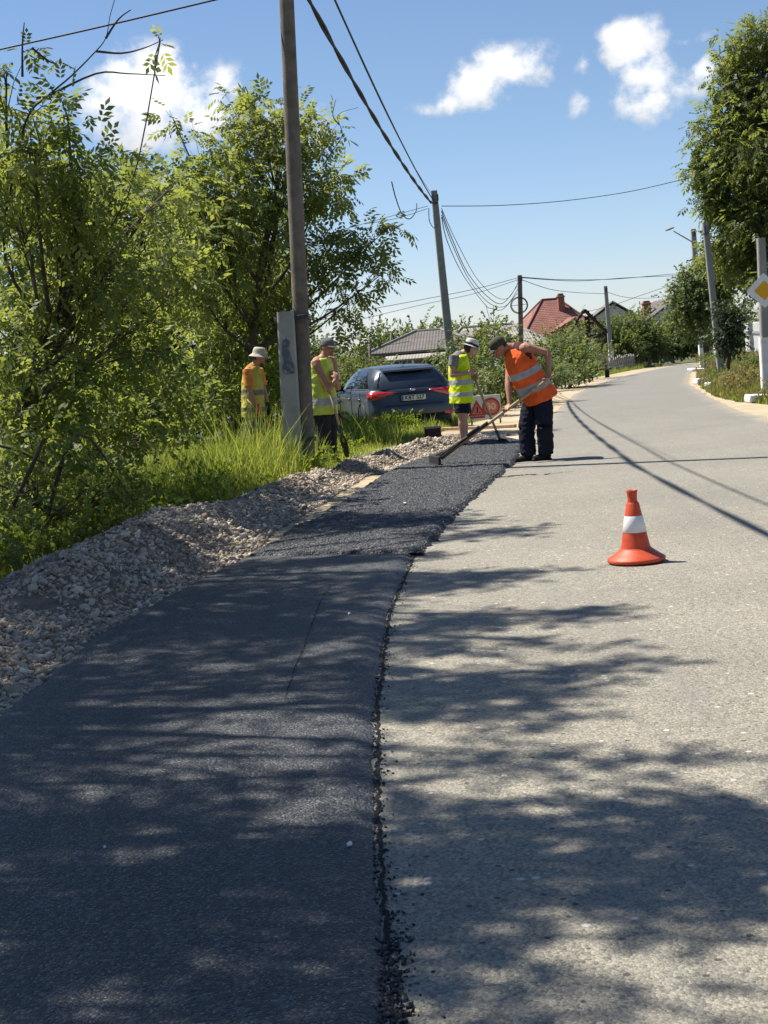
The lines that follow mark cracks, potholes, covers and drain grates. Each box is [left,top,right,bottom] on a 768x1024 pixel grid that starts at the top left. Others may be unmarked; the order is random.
crack [284,587,330,697]
